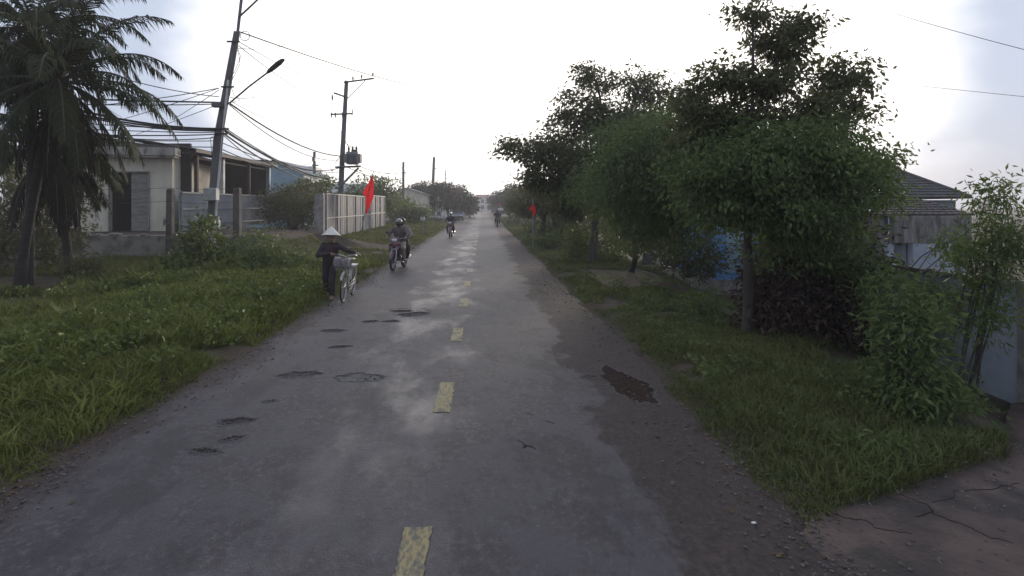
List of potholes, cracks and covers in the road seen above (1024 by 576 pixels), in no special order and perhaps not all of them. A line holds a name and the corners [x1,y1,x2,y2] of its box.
pothole [274,370,327,380]
crack [831,483,1019,543]
pothole [594,364,662,406]
pothole [184,445,226,457]
pothole [215,415,260,427]
pothole [331,371,387,383]
pothole [215,433,250,444]
